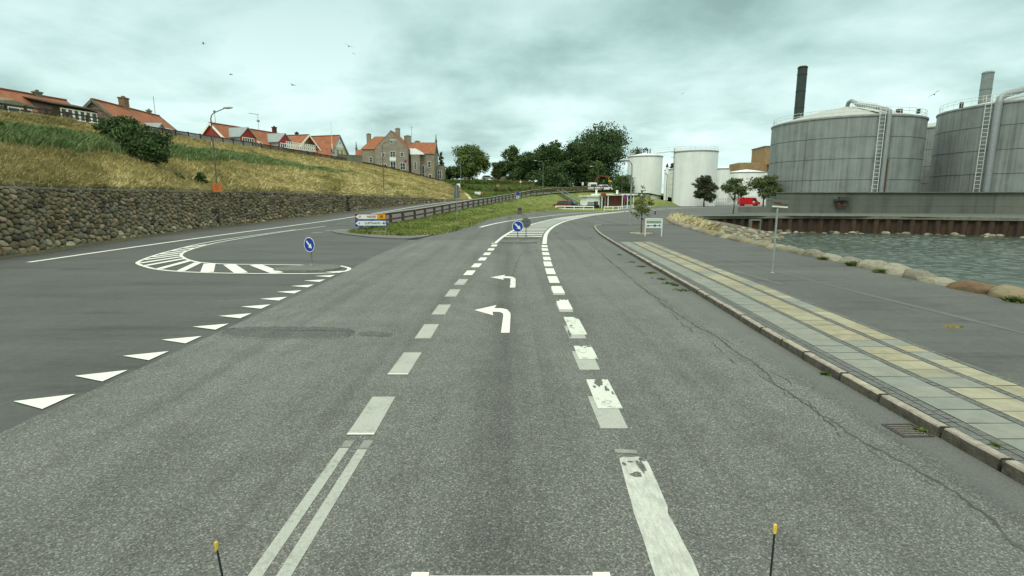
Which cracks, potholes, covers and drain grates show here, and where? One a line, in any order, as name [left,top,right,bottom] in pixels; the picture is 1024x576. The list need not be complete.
crack [590,244,1024,551]
drain grate [881,423,935,438]
